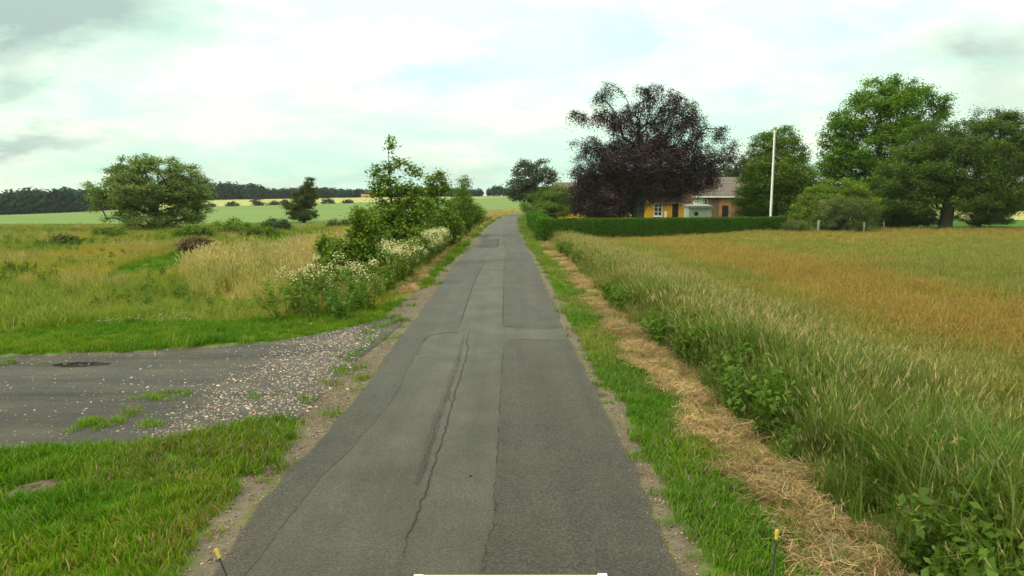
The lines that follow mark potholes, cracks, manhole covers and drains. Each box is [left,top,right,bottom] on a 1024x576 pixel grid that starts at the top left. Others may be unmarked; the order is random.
crack [399,332,470,574]
